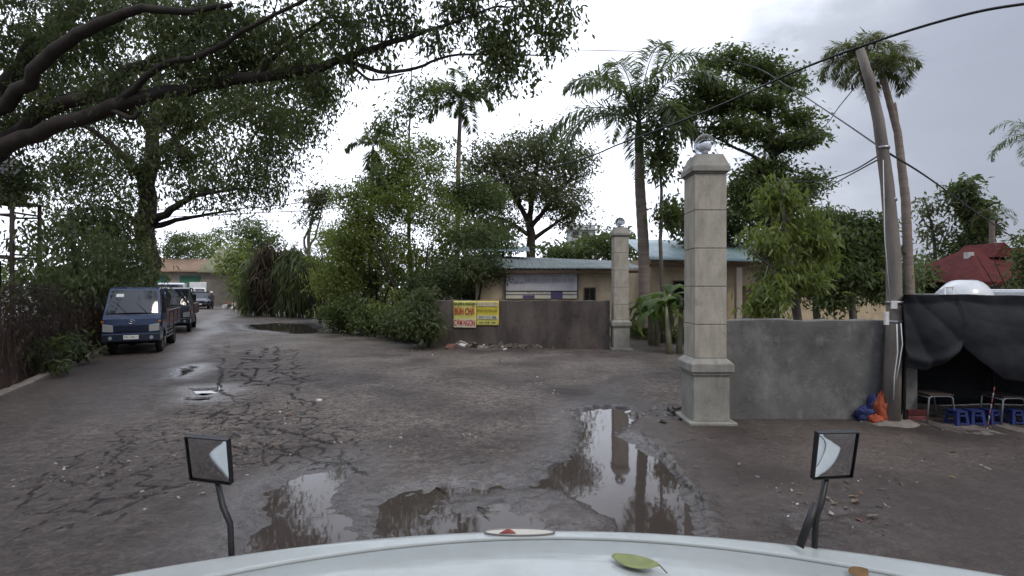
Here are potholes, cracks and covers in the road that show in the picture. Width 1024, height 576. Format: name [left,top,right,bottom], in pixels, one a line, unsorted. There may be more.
pothole [222,462,376,556]
pothole [244,323,326,334]
pothole [547,405,712,537]
crack [12,318,370,532]
